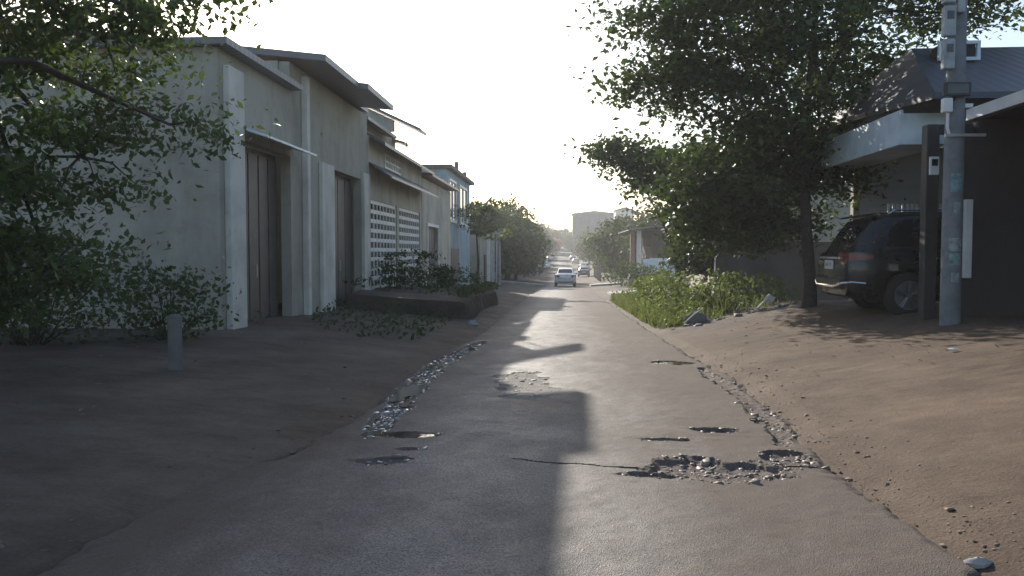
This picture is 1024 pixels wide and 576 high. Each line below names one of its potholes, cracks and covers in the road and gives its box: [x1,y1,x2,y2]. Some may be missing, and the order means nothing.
crack [510,458,638,470]
pothole [344,454,415,467]
pothole [614,454,804,485]
pothole [757,449,820,468]
